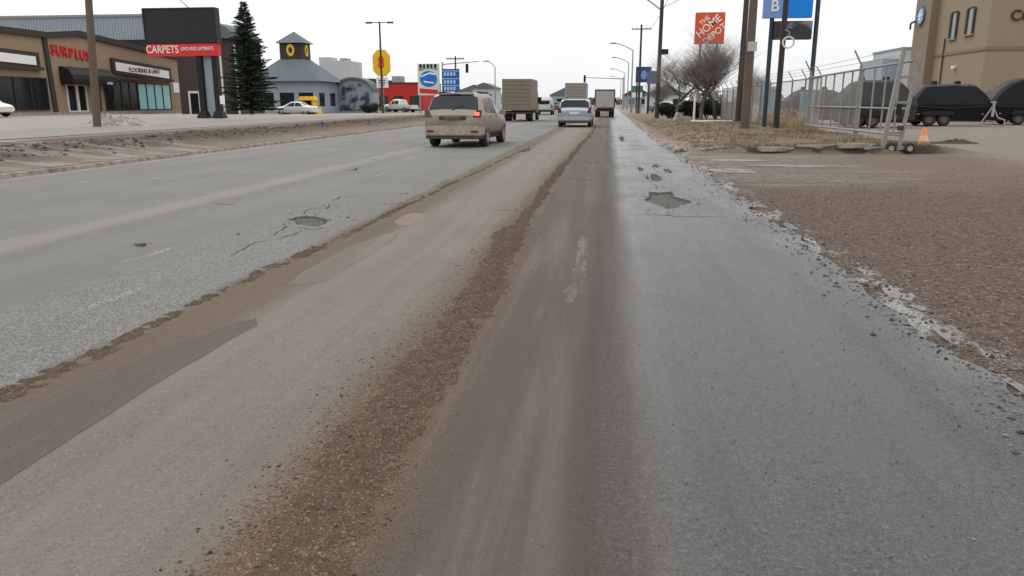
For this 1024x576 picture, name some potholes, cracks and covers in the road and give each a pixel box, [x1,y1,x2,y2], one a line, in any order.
pothole [644,192,692,209]
pothole [288,216,328,227]
crack [231,209,326,256]
